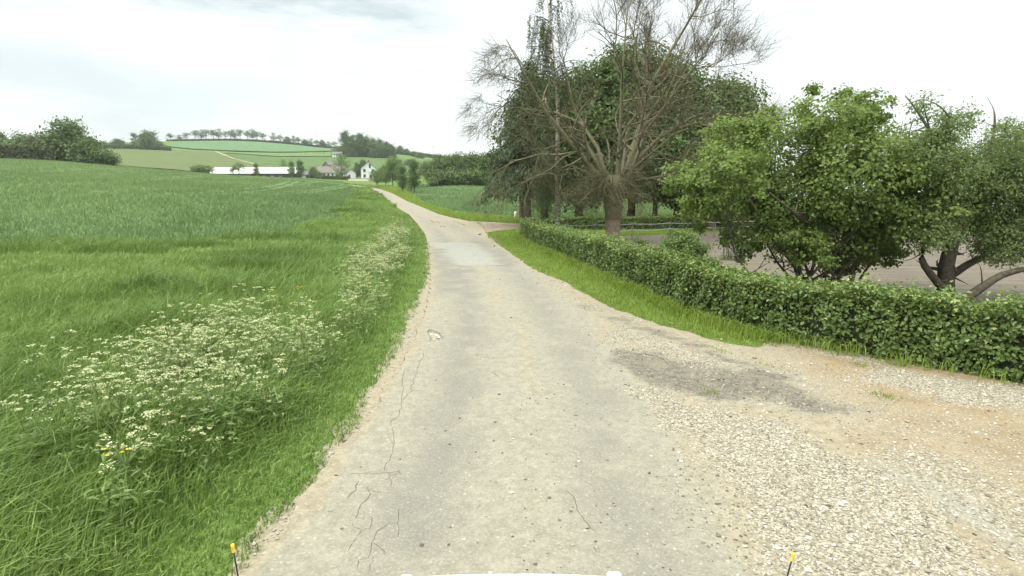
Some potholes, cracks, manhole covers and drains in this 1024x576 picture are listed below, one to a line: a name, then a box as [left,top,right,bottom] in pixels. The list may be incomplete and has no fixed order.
crack [348,353,424,568]
